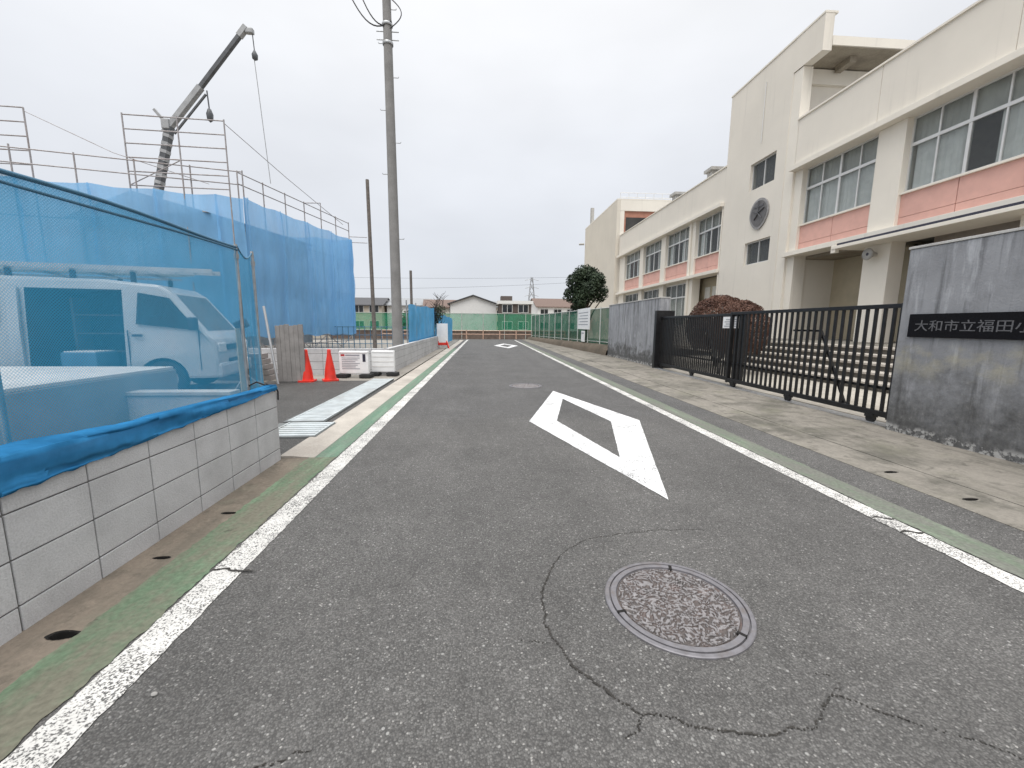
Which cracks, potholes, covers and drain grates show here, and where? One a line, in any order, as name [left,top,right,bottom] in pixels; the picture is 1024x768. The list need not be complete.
crack [516,529,1024,759]
manhole cover [605,562,757,660]
